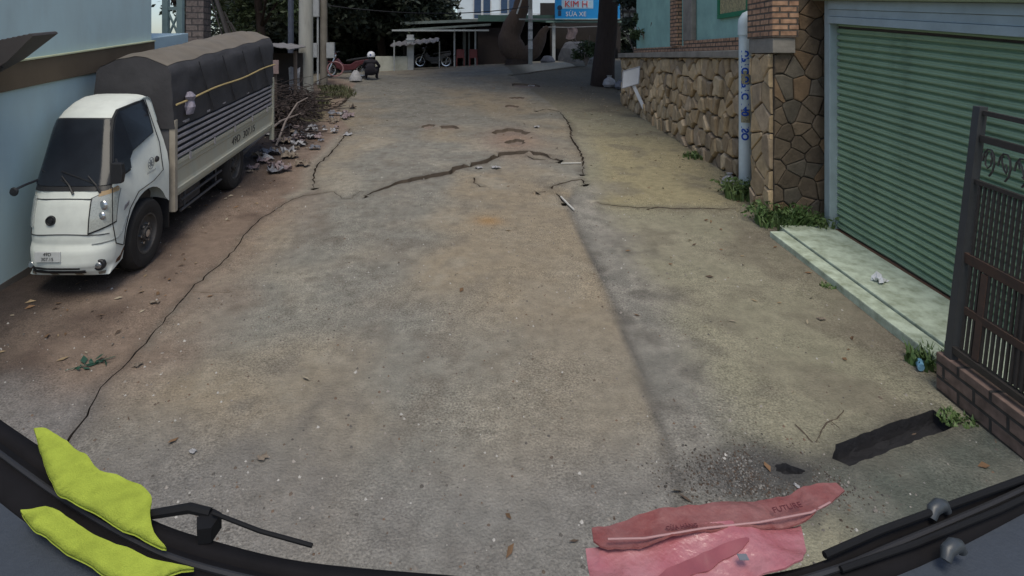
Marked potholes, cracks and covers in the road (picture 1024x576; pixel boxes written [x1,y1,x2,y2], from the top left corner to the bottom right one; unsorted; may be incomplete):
crack [55,108,592,451]
pothole [499,138,531,146]
pothole [487,127,536,137]
